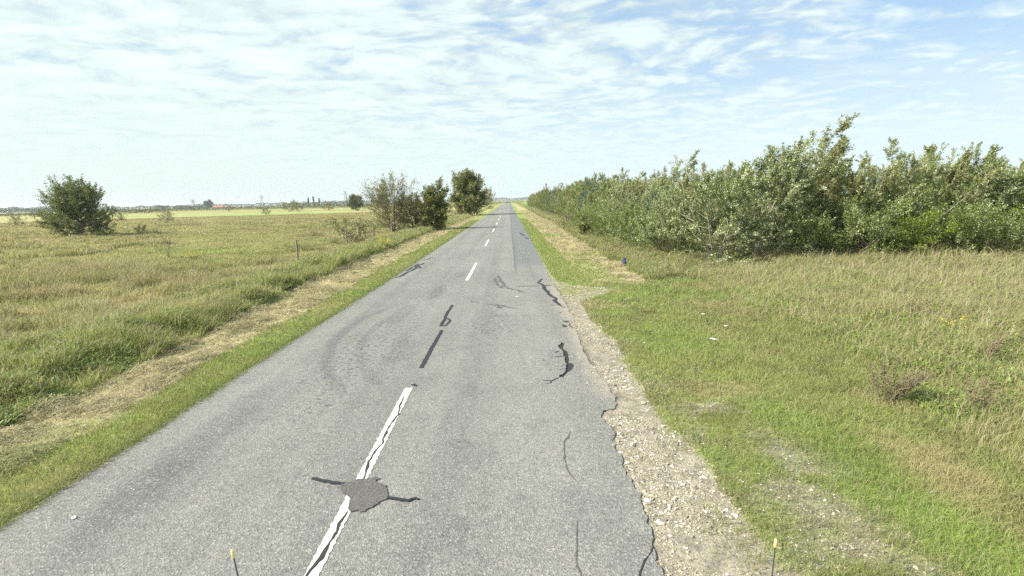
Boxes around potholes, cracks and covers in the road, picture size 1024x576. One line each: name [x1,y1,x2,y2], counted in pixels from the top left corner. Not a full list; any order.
crack [395,257,433,278]
crack [639,545,653,576]
crack [470,276,555,309]
crack [563,431,578,483]
